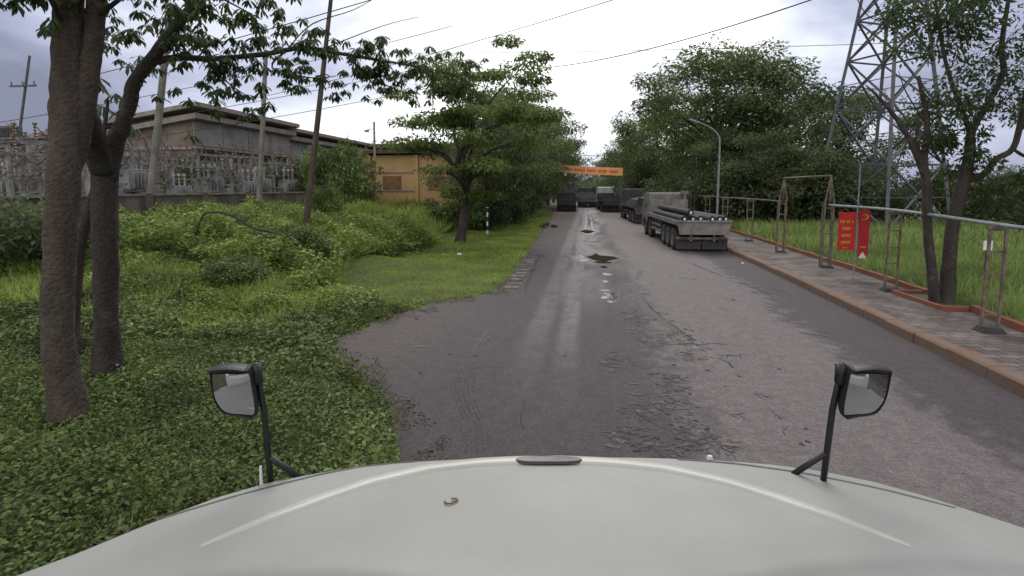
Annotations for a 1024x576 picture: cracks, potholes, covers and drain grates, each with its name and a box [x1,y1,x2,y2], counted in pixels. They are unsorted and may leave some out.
crack [643,298,741,367]
pothole [587,253,618,261]
